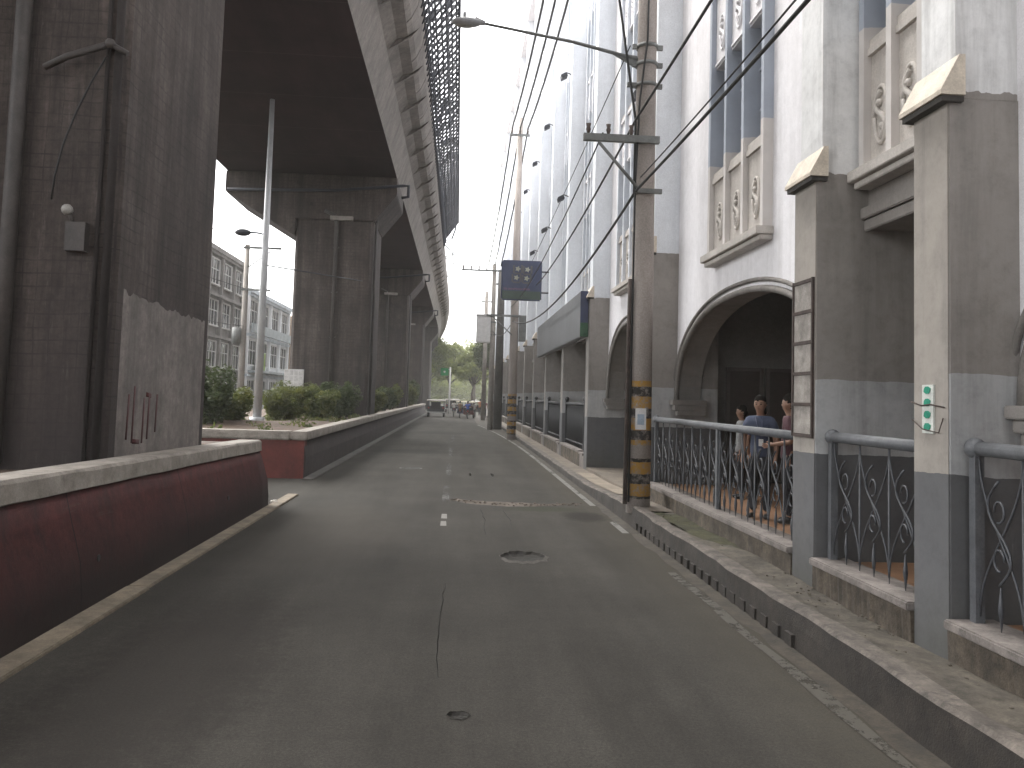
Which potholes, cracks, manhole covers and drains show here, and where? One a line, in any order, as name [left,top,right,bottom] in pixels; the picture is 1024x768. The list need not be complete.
pothole [499,550,549,564]
crack [436,589,445,671]
crack [450,498,577,534]
pothole [446,711,471,721]
